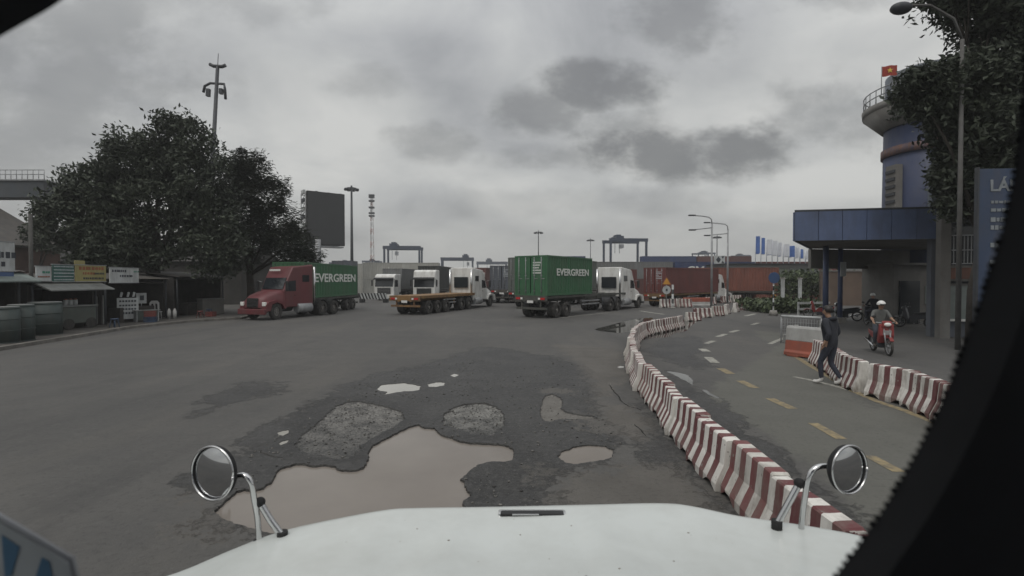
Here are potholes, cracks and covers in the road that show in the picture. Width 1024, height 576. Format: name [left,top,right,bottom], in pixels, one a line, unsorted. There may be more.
pothole [558,445,615,464]
pothole [441,403,506,435]
pothole [540,394,595,422]
crack [610,386,646,436]
pothole [214,424,514,533]
